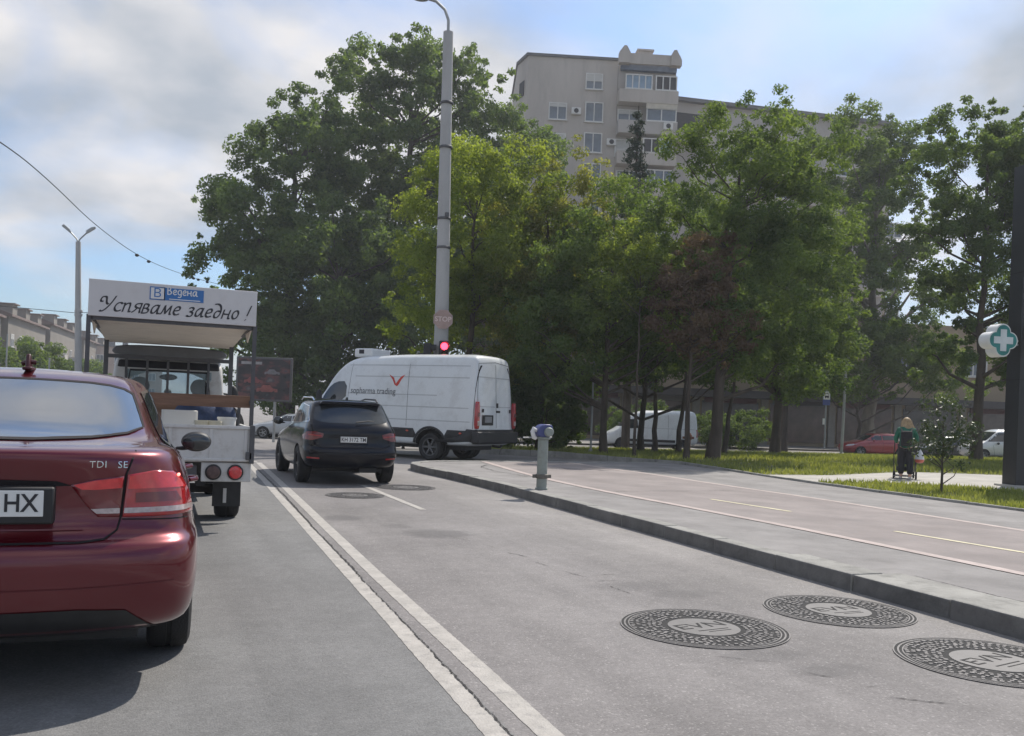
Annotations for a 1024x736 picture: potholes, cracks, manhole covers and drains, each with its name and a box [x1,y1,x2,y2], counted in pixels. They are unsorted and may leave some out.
manhole cover [893,637,1024,688]
manhole cover [763,595,918,628]
manhole cover [620,609,791,650]
